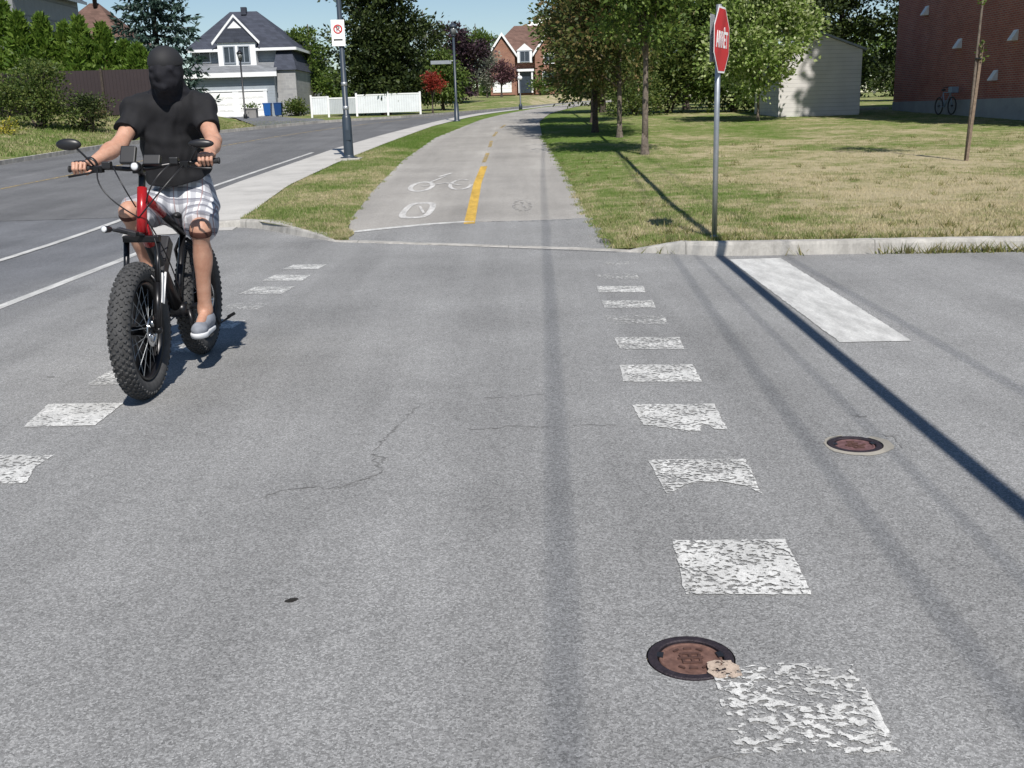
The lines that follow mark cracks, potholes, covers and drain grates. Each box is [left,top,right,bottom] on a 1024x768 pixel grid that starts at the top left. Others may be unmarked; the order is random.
manhole cover [823,435,894,456]
crack [261,407,417,498]
manhole cover [647,636,742,681]
